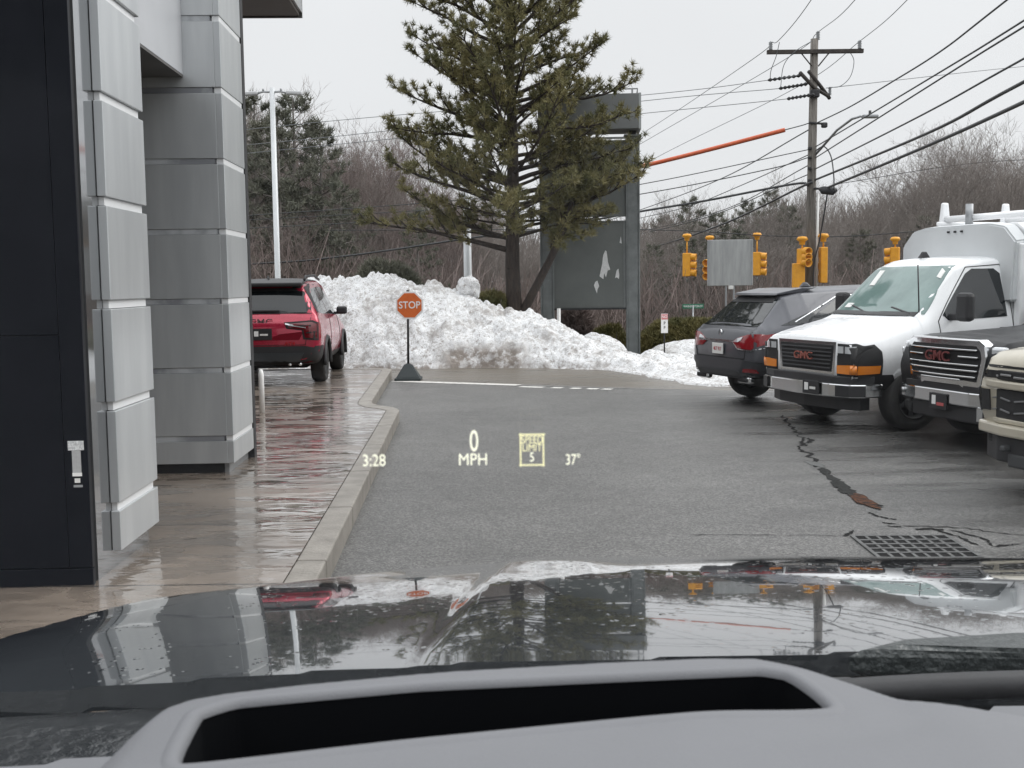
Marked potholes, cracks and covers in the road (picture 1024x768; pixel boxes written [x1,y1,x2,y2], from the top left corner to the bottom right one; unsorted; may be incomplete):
crack [690,512,1022,547]
drain grate [850,534,984,558]
crack [781,415,819,467]
